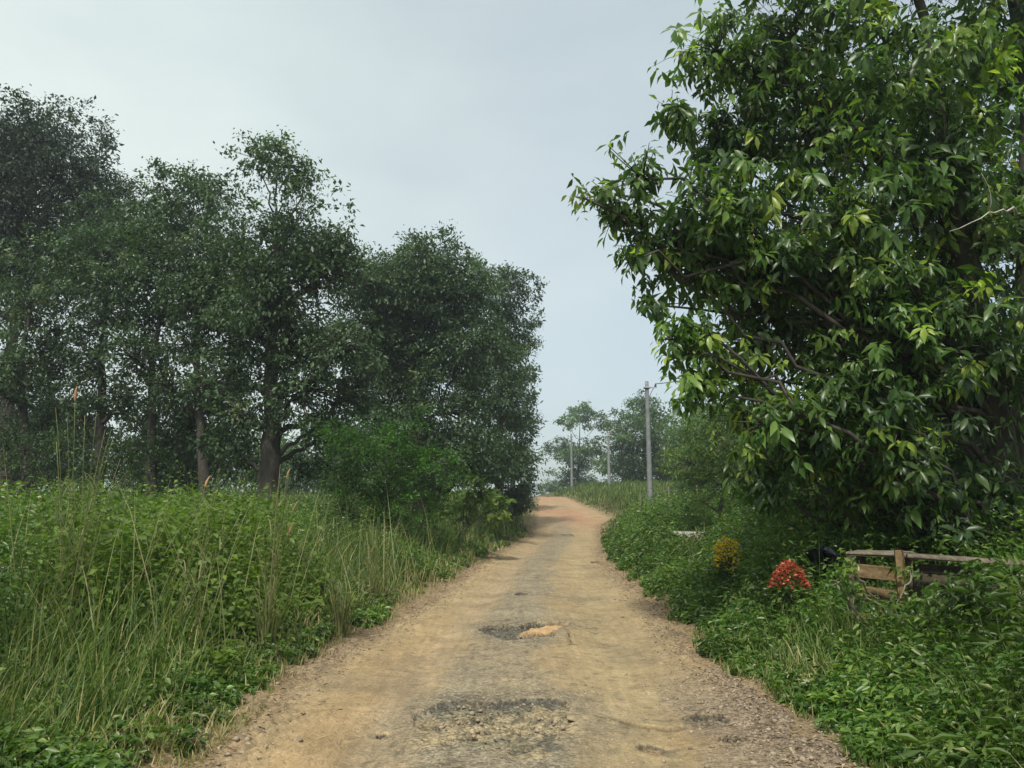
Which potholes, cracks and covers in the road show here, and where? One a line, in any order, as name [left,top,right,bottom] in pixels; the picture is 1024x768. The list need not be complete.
pothole [626,739,680,761]
pothole [666,708,744,732]
pothole [460,619,581,643]
pothole [372,691,619,768]
